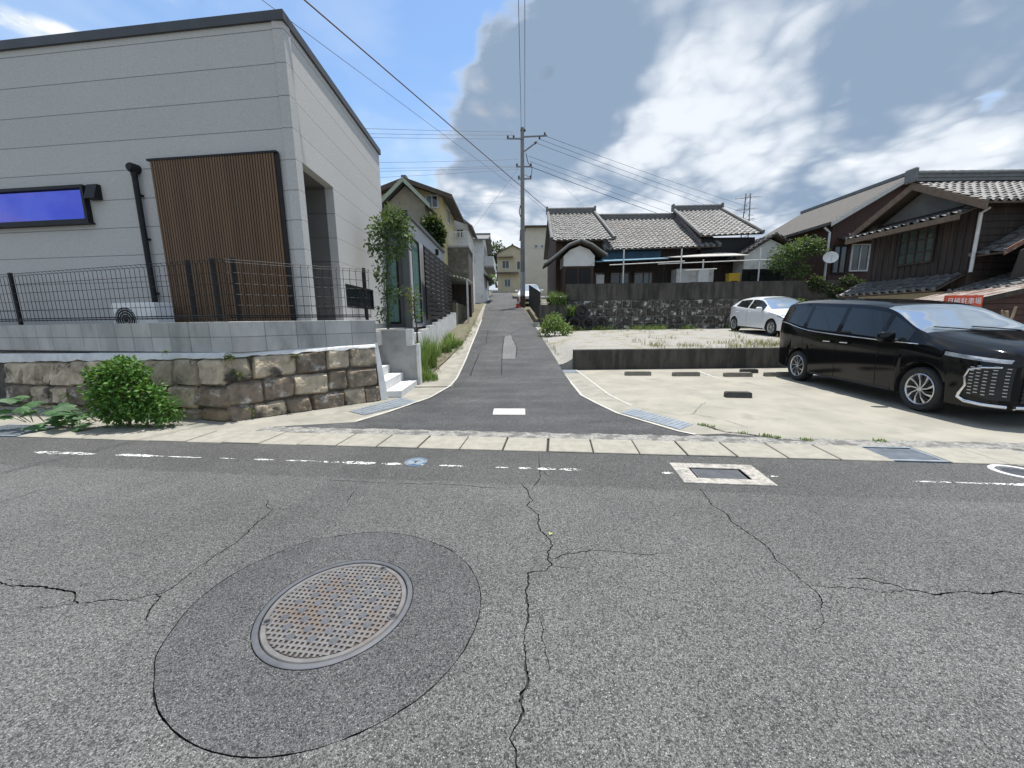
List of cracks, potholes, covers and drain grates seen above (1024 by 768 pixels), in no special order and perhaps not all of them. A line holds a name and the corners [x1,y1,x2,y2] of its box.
manhole cover [251,560,413,671]
drain grate [861,446,950,463]
crack [700,490,1021,634]
crack [0,500,272,622]
crack [509,465,664,768]
